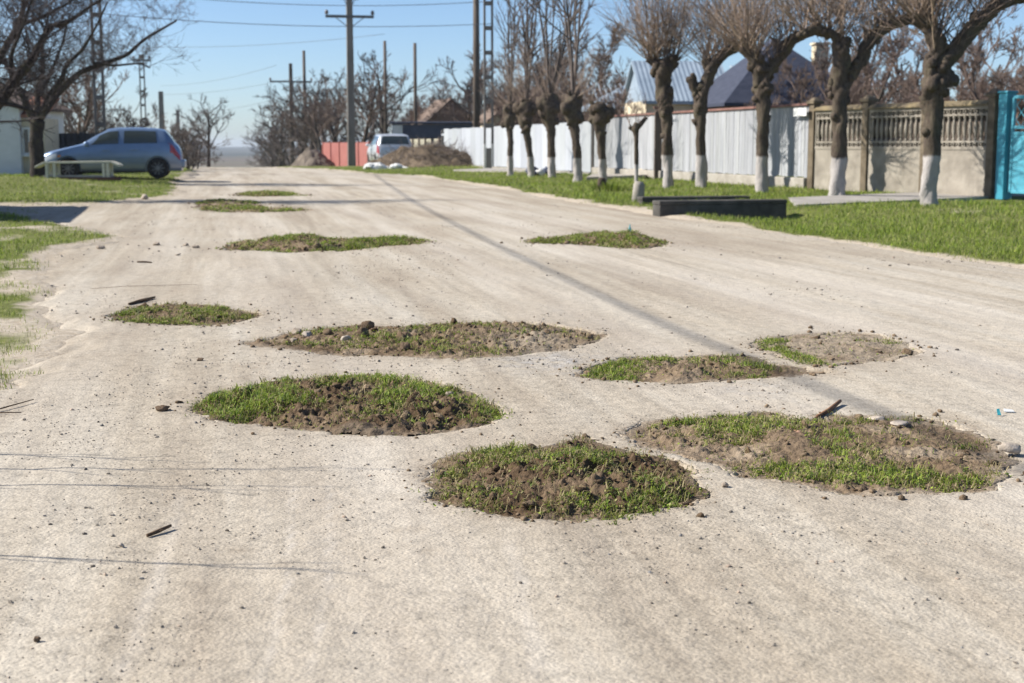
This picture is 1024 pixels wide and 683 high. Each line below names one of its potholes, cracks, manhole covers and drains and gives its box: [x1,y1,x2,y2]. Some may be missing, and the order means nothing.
pothole [89,300,293,330]
pothole [740,326,948,369]
pothole [376,433,716,527]
pothole [500,228,689,249]
pothole [208,230,437,253]
pothole [229,189,312,197]
pothole [188,198,312,213]
pothole [219,316,609,361]
pothole [580,404,1024,507]
pothole [536,349,887,389]
pothole [152,369,533,443]
